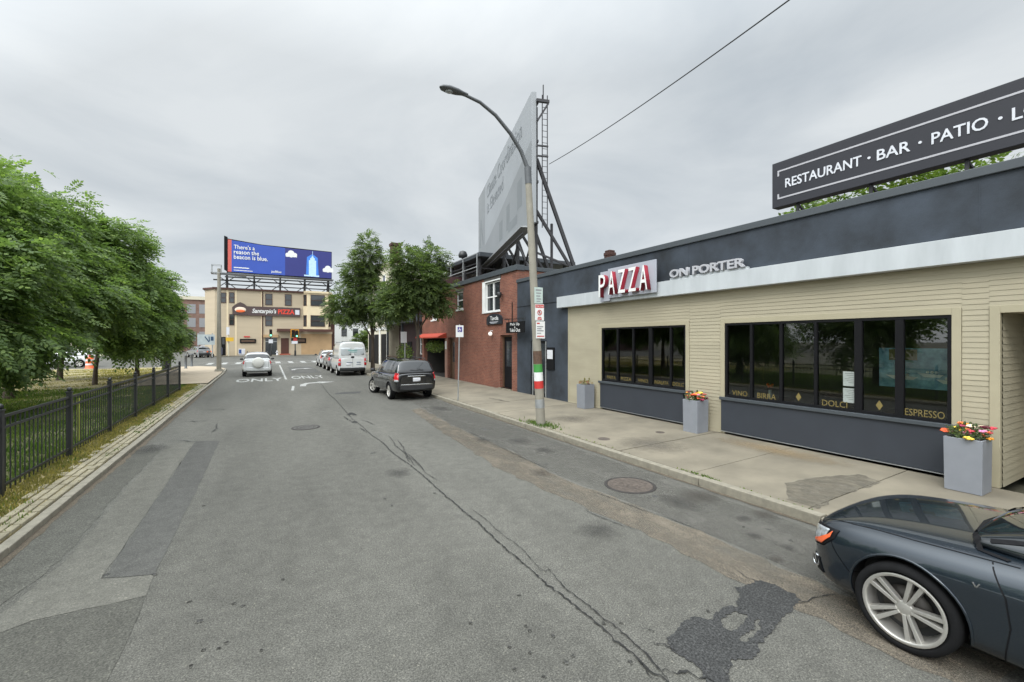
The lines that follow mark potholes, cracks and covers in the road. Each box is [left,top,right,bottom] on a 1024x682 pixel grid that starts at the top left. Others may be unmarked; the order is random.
manhole cover [604,477,657,494]
crack [318,381,715,682]
